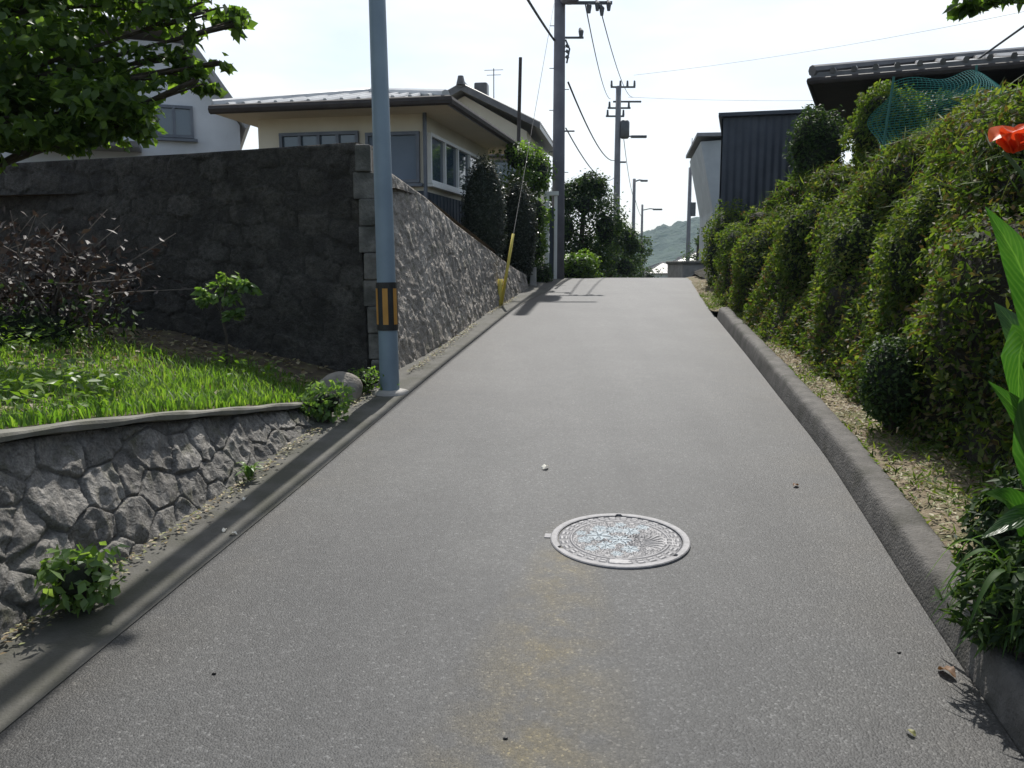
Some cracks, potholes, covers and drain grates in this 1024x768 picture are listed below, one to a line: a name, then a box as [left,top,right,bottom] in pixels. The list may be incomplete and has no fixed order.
manhole cover [544,513,691,570]
